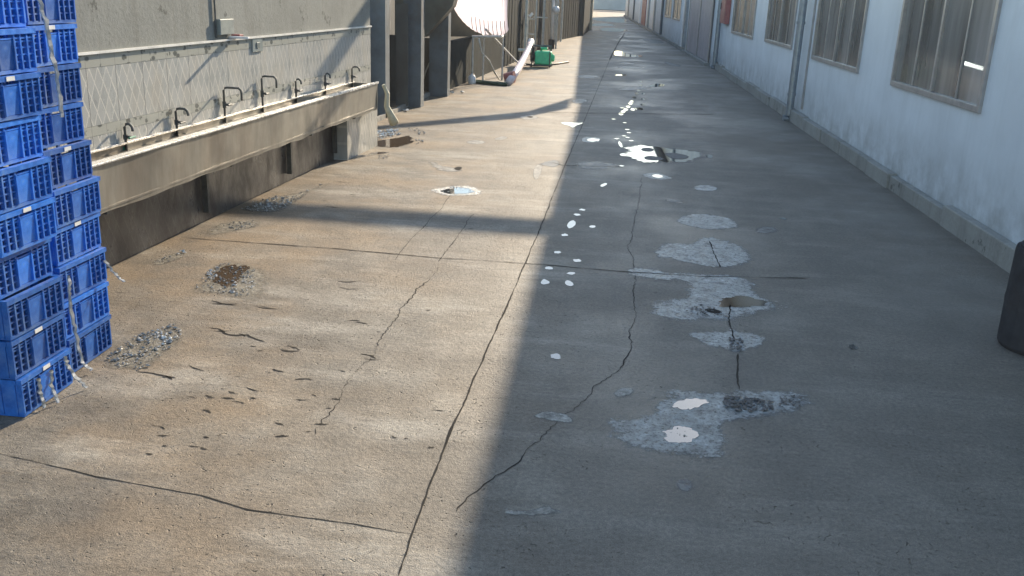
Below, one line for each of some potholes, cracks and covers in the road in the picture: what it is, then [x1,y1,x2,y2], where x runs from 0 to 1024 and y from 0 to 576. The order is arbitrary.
pothole [196,263,264,298]
crack [315,214,474,434]
pothole [241,184,321,212]
pothole [432,186,481,196]
pothole [107,324,182,369]
crack [456,179,642,511]
crack [209,327,265,342]
